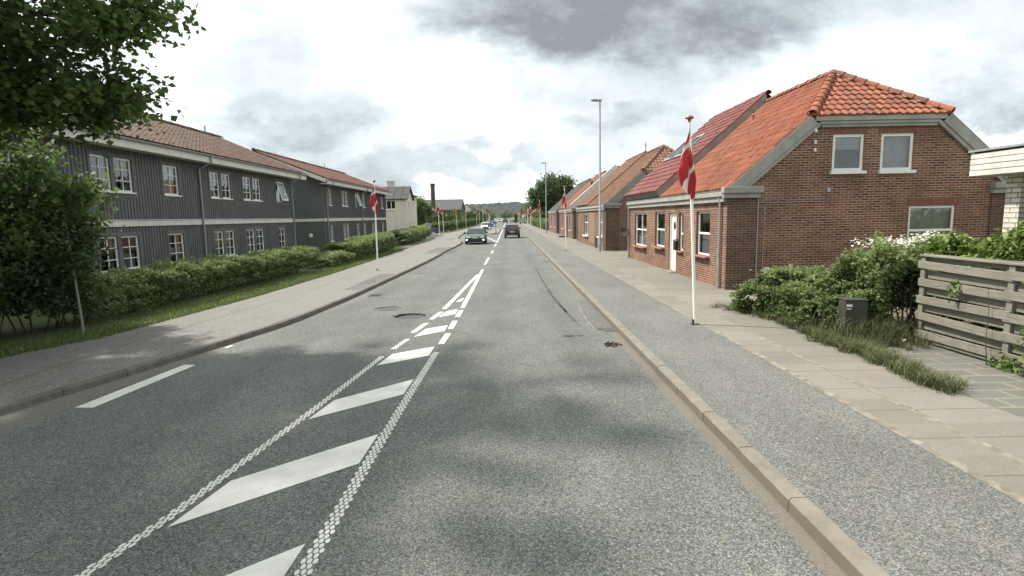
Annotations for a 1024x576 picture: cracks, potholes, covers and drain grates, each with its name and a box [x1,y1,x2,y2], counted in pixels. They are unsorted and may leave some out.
crack [534,267,604,341]
